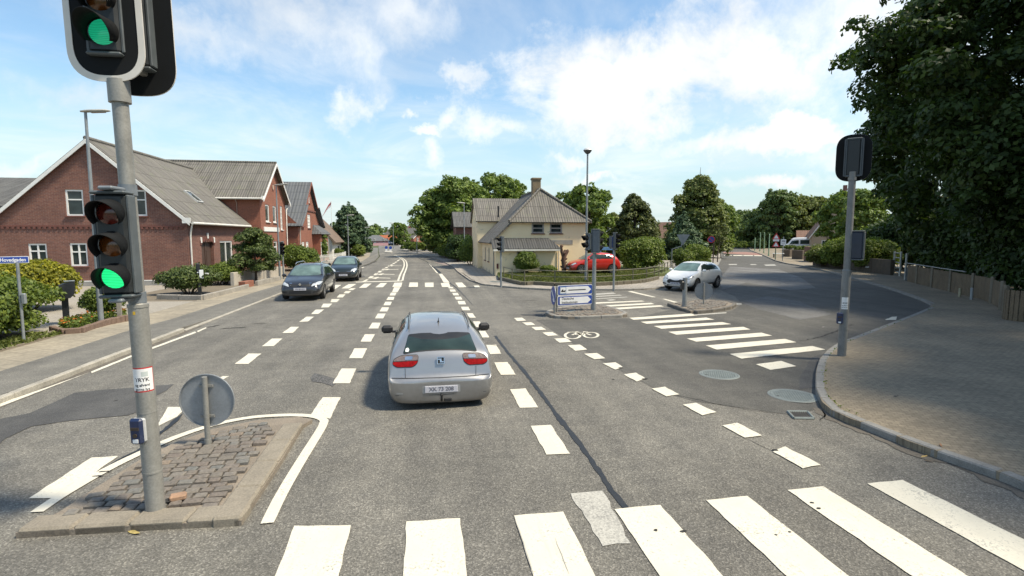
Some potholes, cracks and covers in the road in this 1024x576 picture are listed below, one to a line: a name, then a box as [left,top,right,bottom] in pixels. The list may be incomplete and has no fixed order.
manhole cover [699,369,740,380]
manhole cover [767,389,818,403]
drain grate [786,410,815,420]
